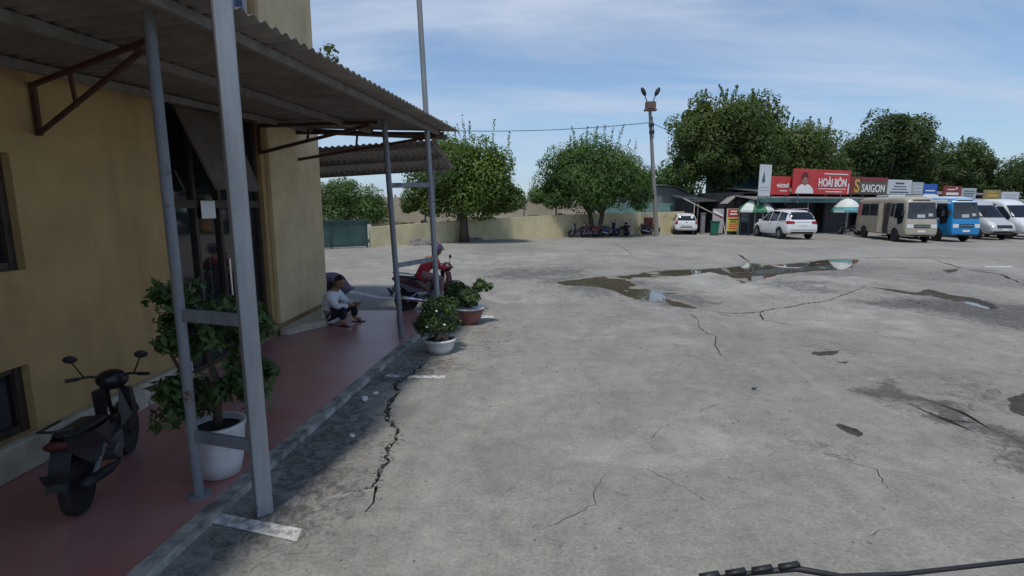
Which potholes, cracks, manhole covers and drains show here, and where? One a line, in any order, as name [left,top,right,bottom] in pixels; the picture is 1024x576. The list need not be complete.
pothole [1006,393,1024,416]
pothole [836,423,863,437]
crack [344,361,428,512]
pothole [873,287,999,309]
crack [531,476,605,531]
crack [907,394,1023,444]
crack [691,286,866,357]
pothole [556,258,859,311]
